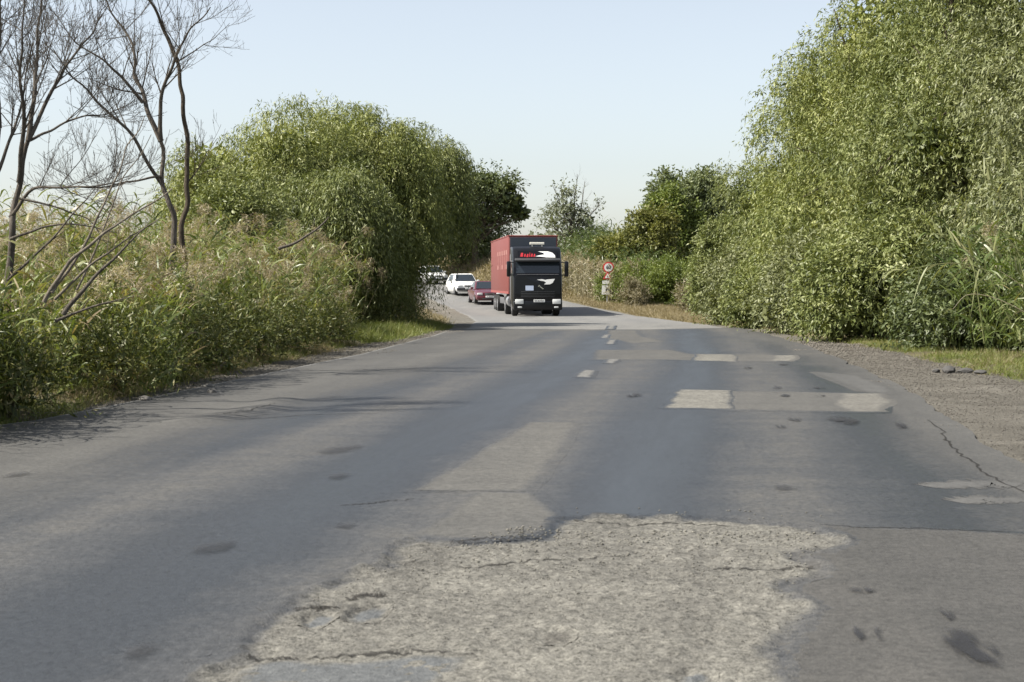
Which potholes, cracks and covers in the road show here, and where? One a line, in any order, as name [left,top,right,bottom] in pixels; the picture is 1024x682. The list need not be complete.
crack [928,420,1024,492]
pothole [534,624,578,647]
pothole [296,610,341,629]
pothole [340,600,393,624]
pothole [673,667,719,682]
